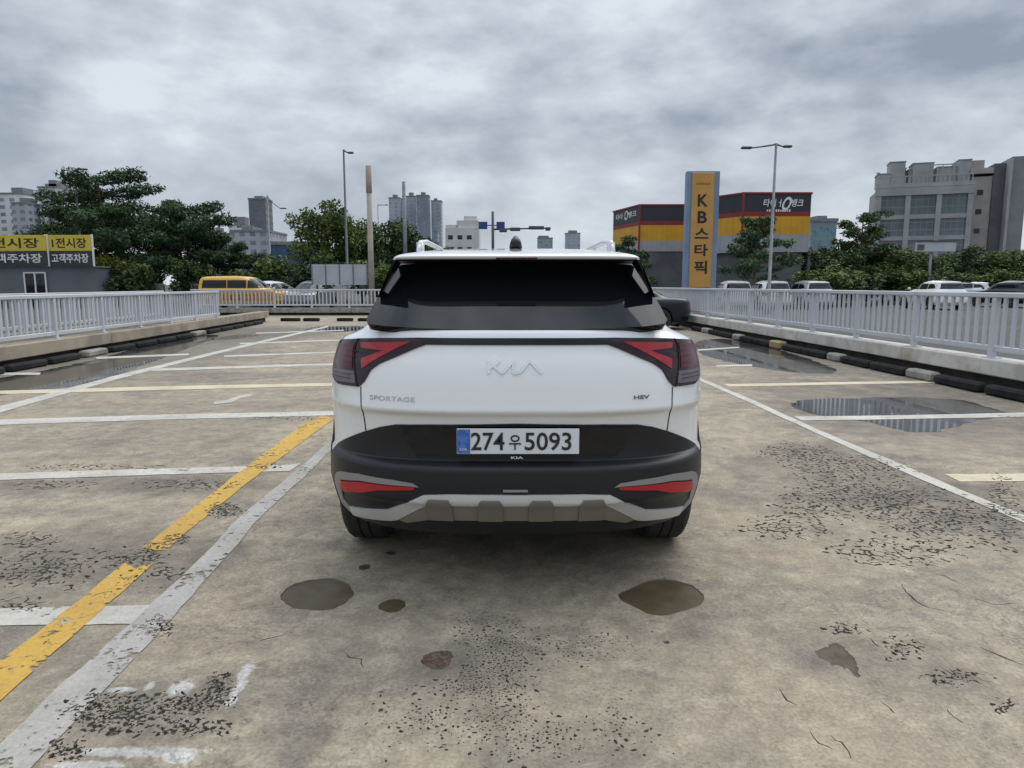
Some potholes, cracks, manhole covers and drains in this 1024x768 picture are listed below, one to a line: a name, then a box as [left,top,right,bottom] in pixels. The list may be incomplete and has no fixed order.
crack [820,622,1015,714]
crack [737,442,1024,611]
pothole [378,599,406,613]
pothole [618,579,704,616]
pothole [280,578,354,611]
pothole [815,643,860,678]
crack [0,531,185,612]
